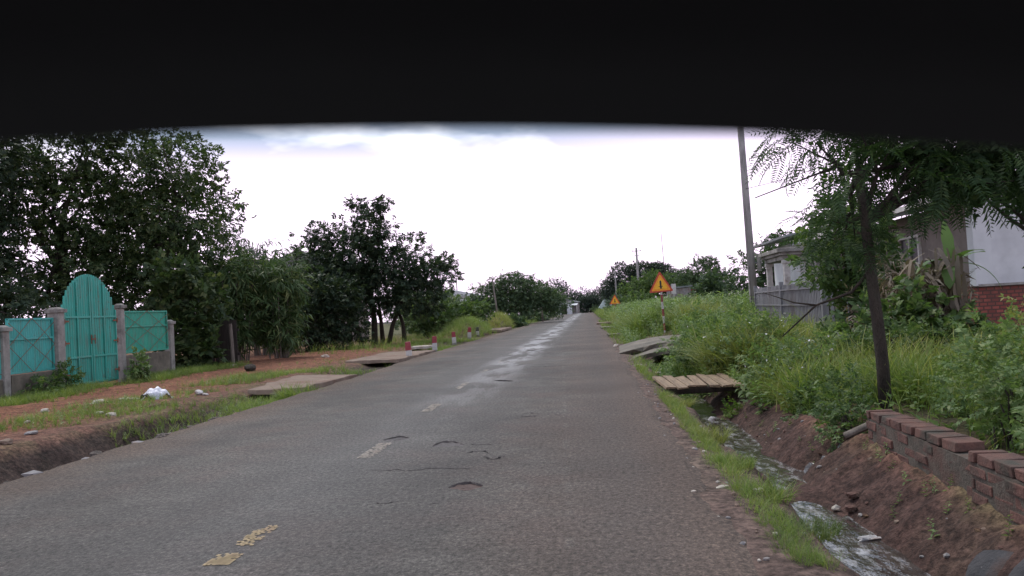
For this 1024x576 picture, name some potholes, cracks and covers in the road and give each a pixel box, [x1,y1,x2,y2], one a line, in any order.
pothole [448,481,483,491]
crack [372,444,505,471]
